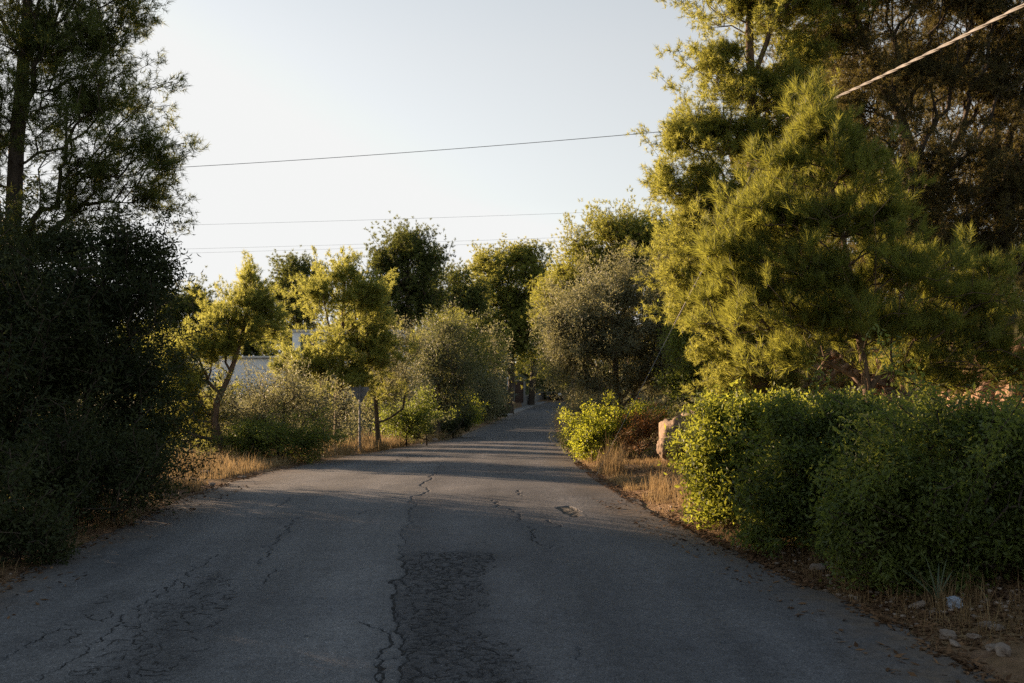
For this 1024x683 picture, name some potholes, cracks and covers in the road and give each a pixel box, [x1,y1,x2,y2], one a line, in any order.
crack [360,466,531,683]
crack [5,554,233,683]
pothole [556,506,583,518]
